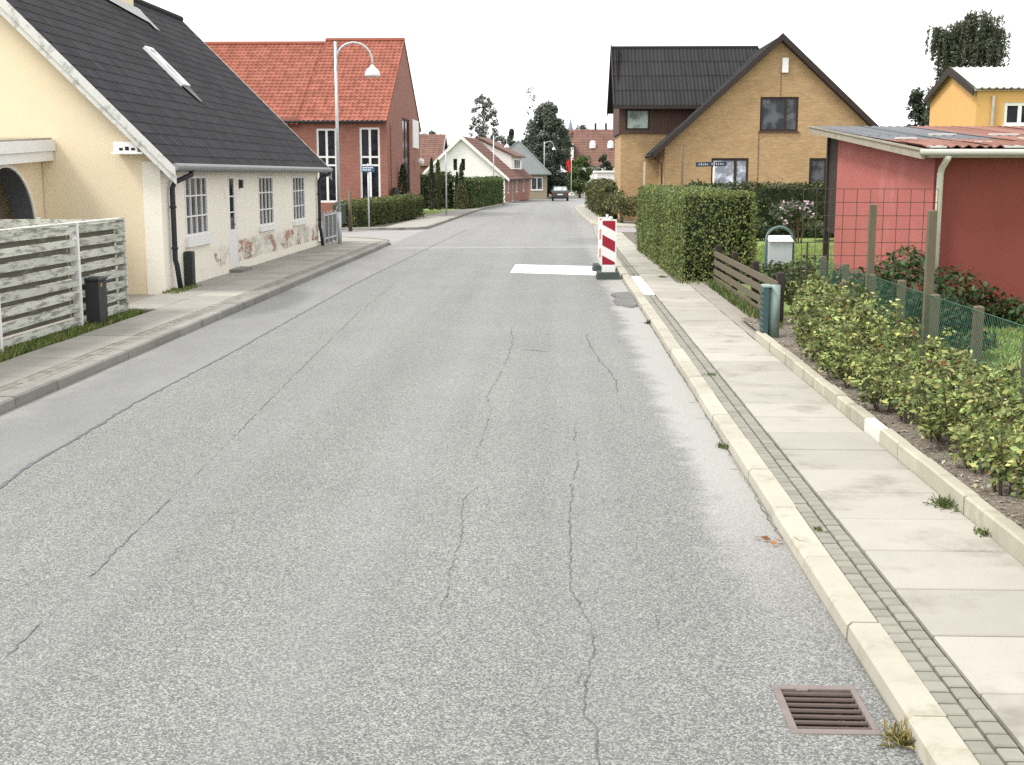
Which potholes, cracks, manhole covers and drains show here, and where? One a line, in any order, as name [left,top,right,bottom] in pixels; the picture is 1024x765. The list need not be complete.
drain grate [771,685,882,736]
crack [568,428,600,765]
crack [440,484,481,613]
crack [476,328,548,456]
